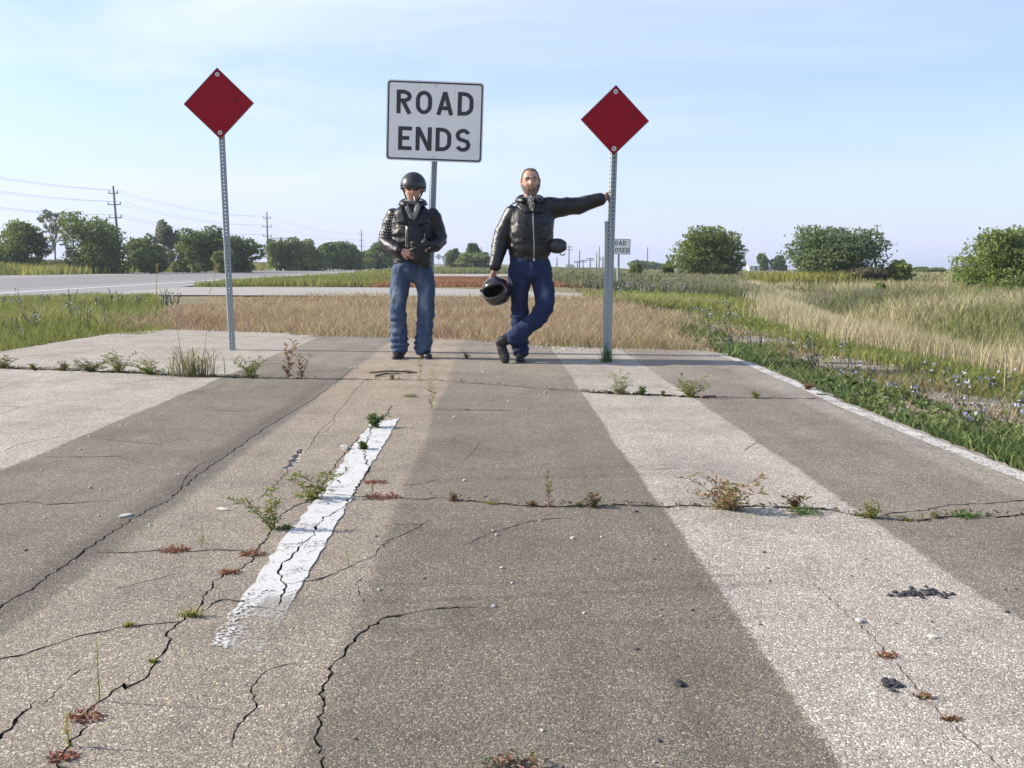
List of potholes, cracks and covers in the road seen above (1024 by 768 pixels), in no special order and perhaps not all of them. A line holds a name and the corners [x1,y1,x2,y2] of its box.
crack [351,479,1024,543]
crack [0,405,479,768]
crack [304,382,363,452]
crack [814,584,1001,768]
